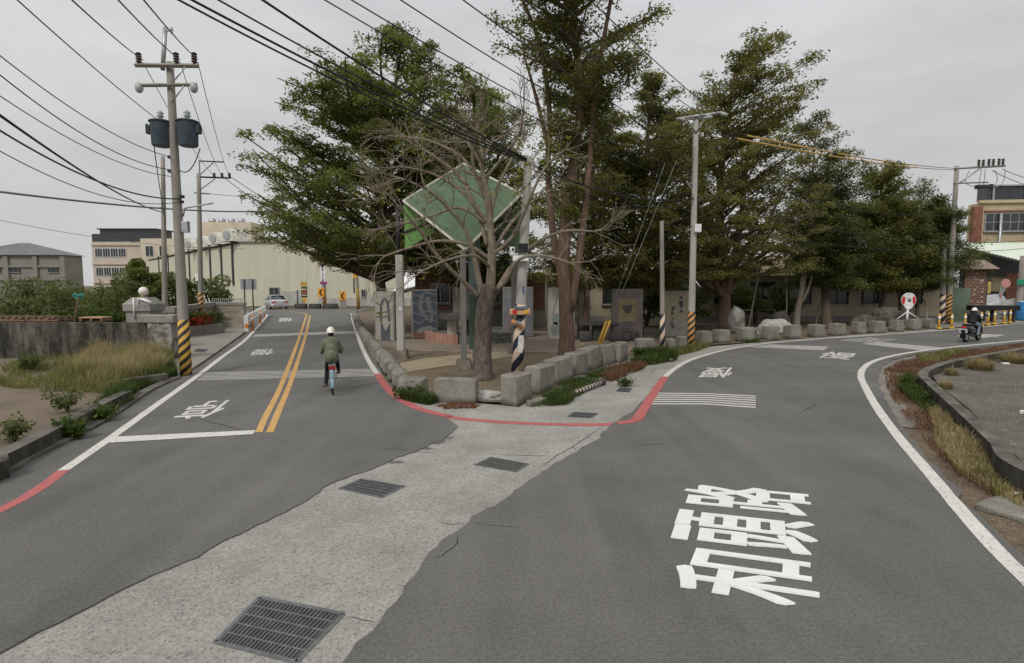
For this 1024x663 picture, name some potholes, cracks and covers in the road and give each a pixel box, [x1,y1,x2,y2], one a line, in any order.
drain grate [213,596,346,663]
drain grate [474,457,530,472]
crack [502,427,601,465]
drain grate [339,478,405,498]
